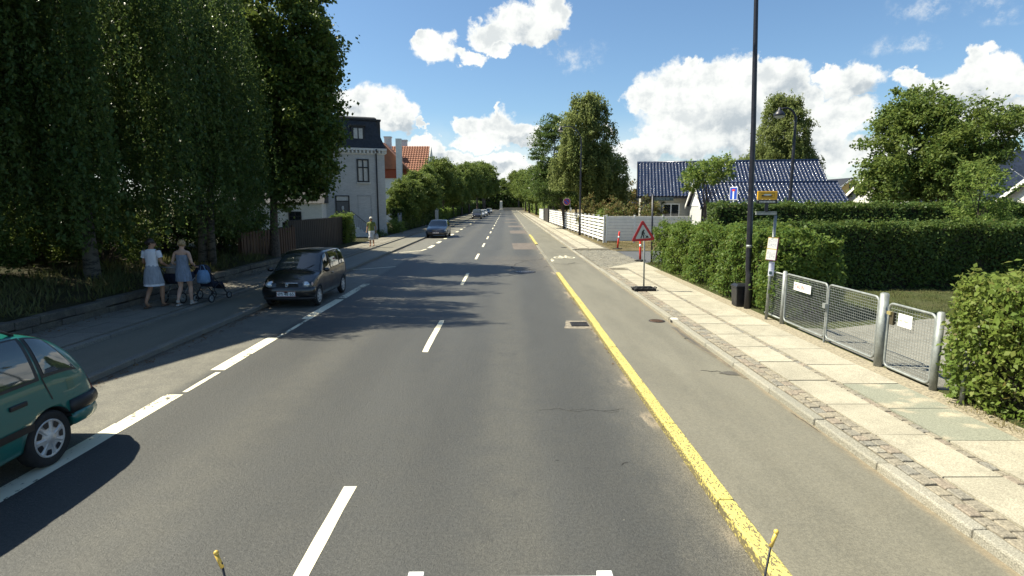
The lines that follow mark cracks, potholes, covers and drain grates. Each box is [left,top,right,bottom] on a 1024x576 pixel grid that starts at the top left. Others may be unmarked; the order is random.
drain grate [564,320,592,329]
